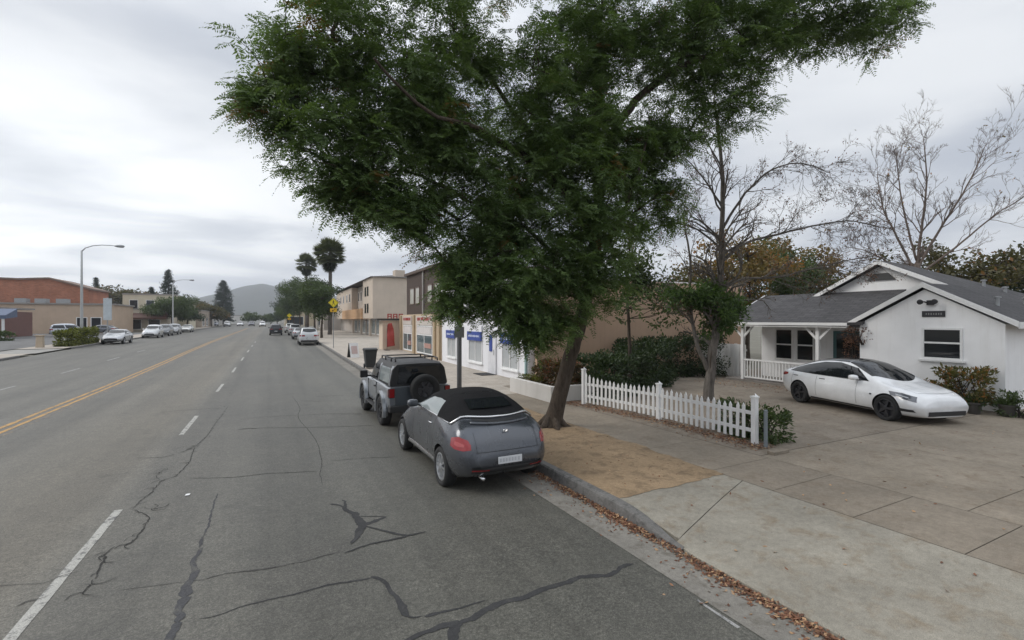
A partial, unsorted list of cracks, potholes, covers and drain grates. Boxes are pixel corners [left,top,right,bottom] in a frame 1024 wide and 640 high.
crack [424,600,485,617]
crack [0,396,383,640]
